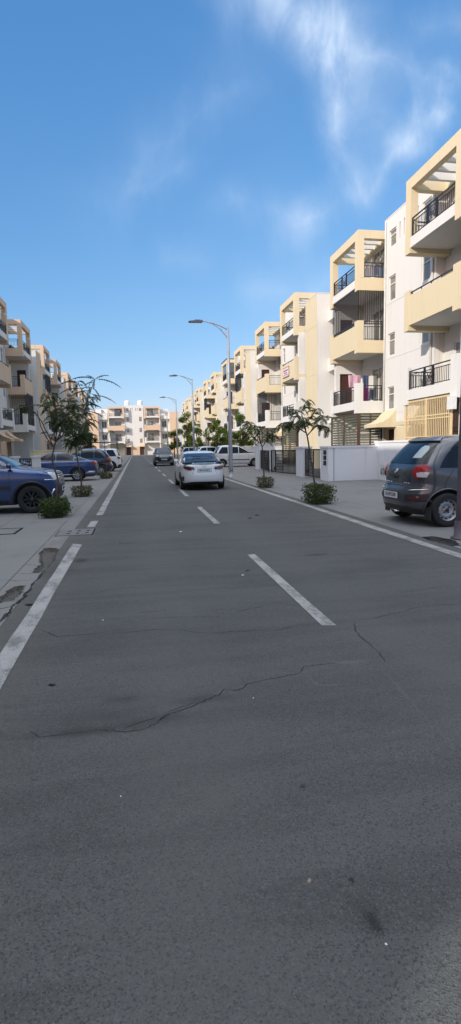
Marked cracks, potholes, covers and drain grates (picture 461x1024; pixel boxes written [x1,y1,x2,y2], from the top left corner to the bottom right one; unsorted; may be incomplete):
crack [0,565,316,637]
crack [30,663,334,738]
crack [352,585,455,662]
